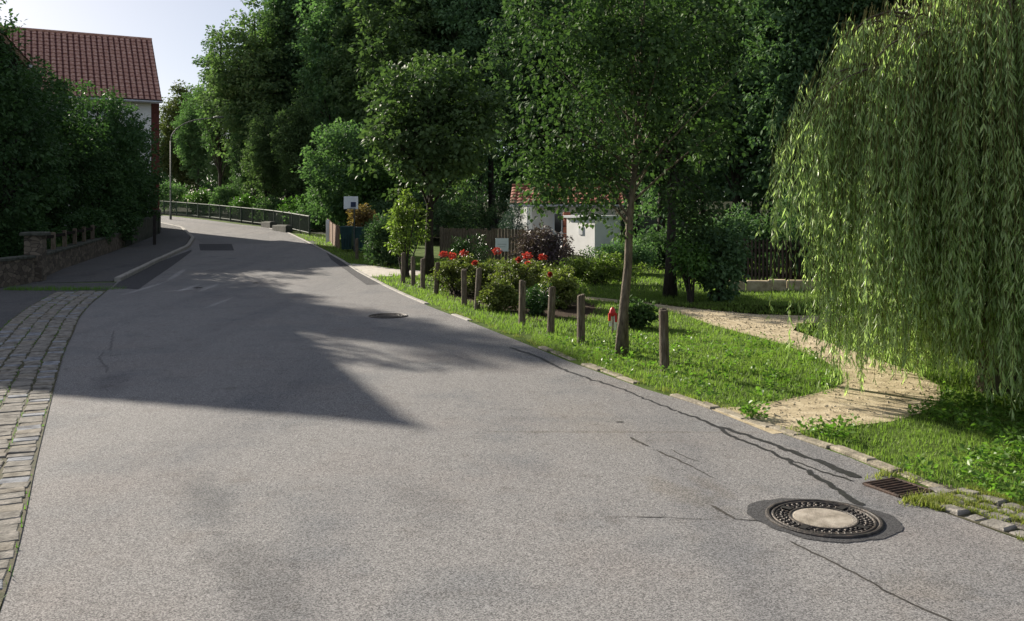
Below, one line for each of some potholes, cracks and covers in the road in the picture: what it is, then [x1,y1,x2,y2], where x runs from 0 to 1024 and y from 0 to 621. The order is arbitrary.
crack [96,331,115,373]
drain grate [862,477,933,498]
crack [790,541,953,621]
manhole cover [747,498,903,543]
crack [605,505,758,521]
crack [616,421,716,479]
